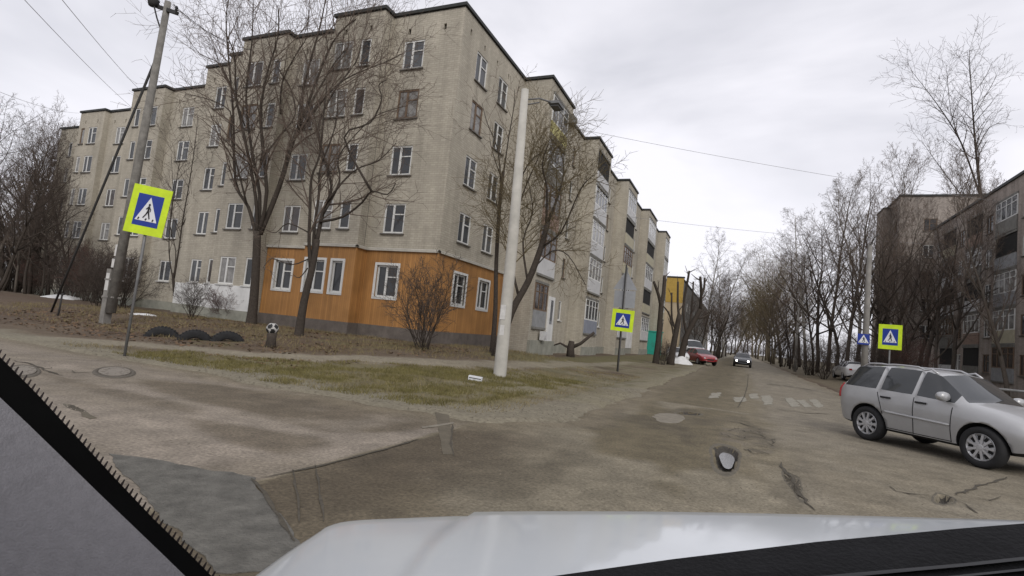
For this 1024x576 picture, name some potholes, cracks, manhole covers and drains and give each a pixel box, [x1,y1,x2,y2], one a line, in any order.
crack [954,477,1007,514]
crack [292,465,324,521]
manhole cover [12,365,41,378]
crack [721,421,815,510]
manhole cover [92,366,136,379]
pothole [709,443,742,477]
